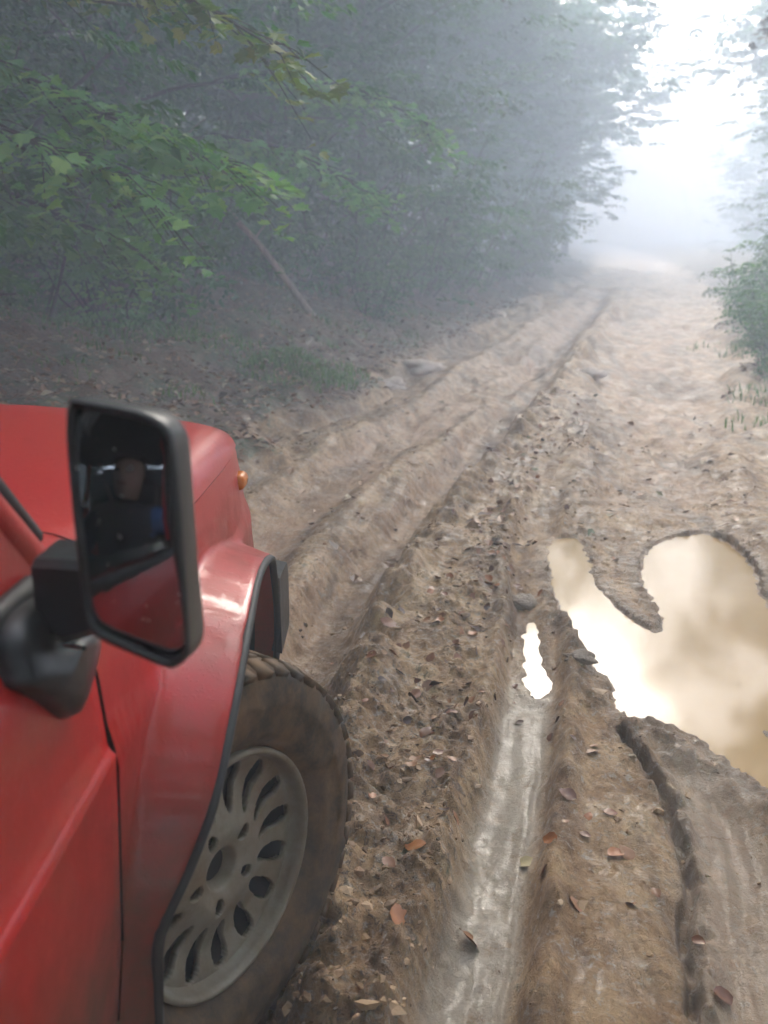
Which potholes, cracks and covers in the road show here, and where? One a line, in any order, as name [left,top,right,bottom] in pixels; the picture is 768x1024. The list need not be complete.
pothole [523,523,768,817]
